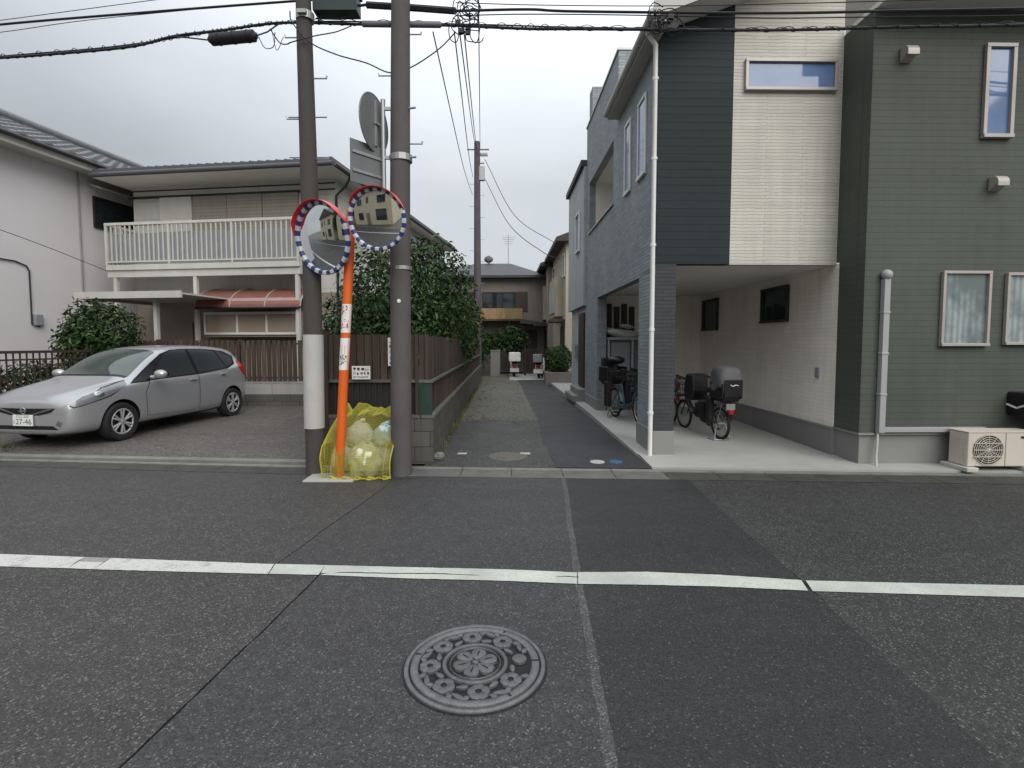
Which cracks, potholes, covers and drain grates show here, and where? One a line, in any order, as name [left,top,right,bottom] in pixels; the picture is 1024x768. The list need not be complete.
manhole cover [488,452,527,461]
manhole cover [402,625,547,717]
